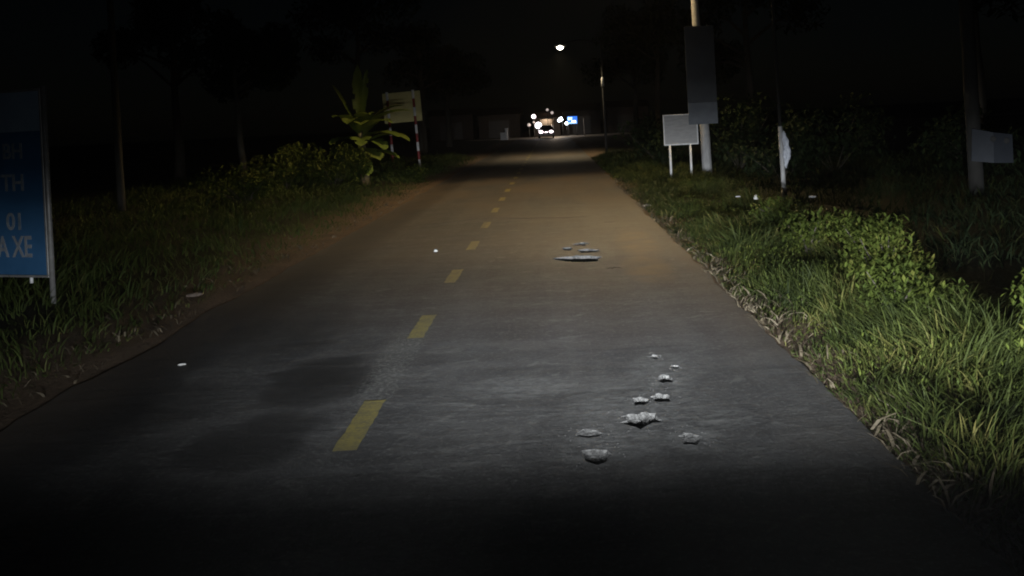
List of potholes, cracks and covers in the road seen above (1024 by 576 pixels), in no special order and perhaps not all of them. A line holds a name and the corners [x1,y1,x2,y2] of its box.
pothole [605,409,668,431]
